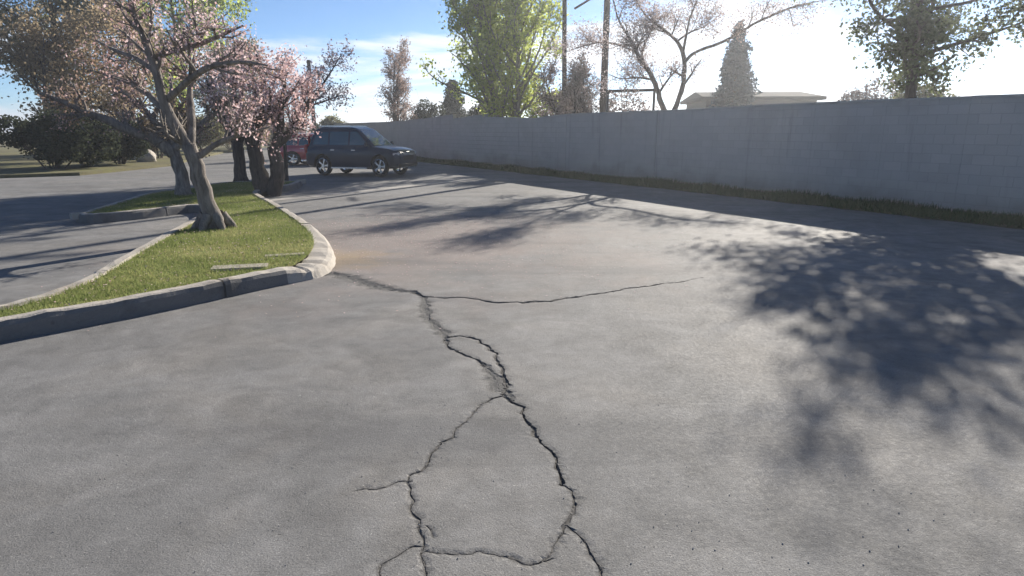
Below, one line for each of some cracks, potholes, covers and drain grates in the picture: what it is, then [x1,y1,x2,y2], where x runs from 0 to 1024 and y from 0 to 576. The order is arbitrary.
crack [324,272,692,576]
